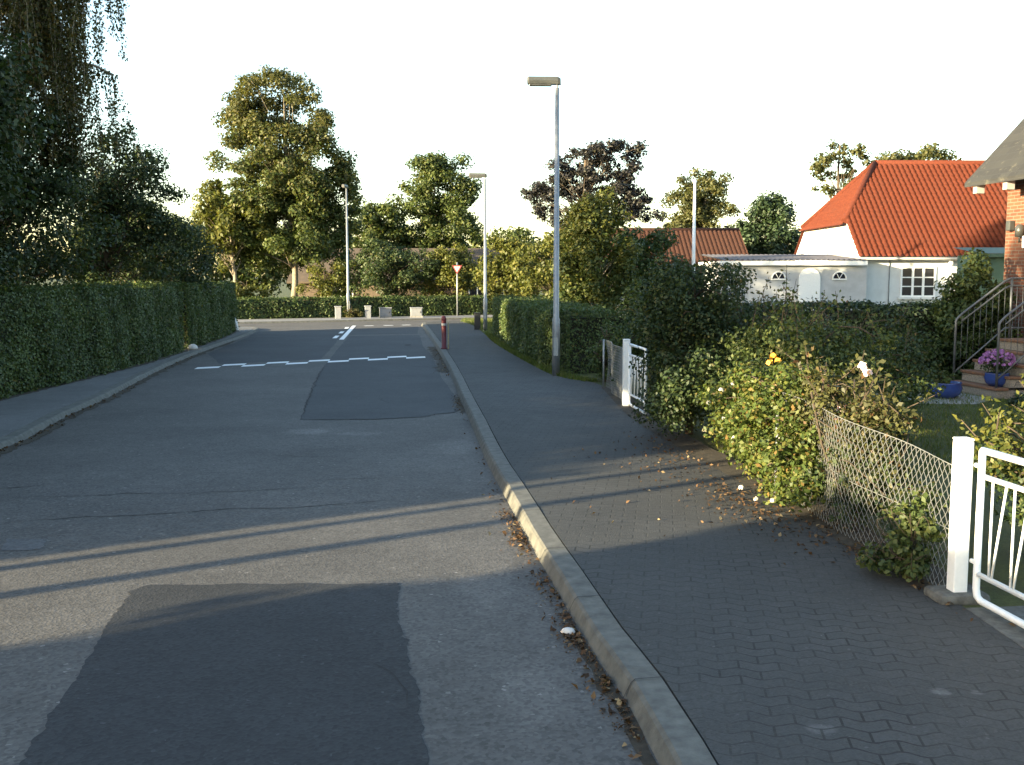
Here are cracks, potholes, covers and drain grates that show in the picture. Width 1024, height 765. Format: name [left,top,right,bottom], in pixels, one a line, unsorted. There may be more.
crack [0,483,396,523]
